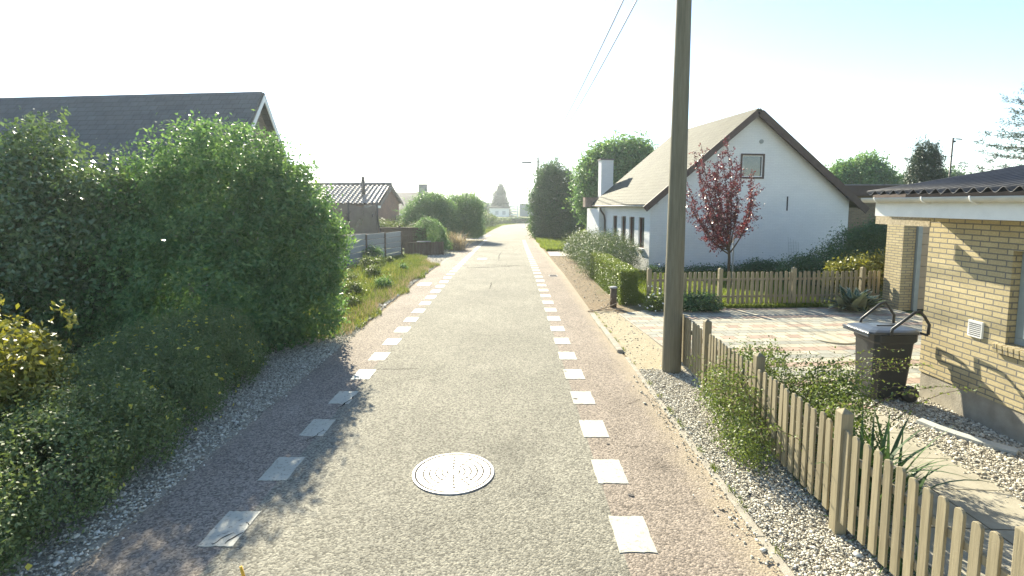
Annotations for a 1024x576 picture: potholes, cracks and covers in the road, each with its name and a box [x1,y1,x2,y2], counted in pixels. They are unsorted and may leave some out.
manhole cover [412,453,495,495]
